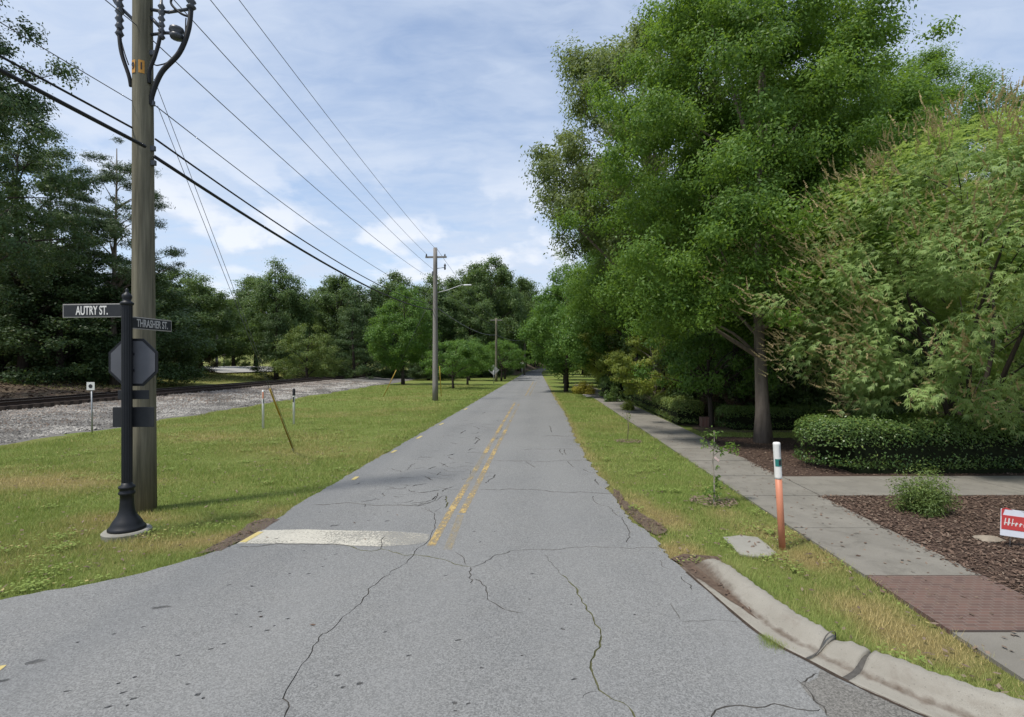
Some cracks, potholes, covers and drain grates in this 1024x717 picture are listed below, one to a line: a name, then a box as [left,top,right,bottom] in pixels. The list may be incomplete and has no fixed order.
crack [241,411,736,717]
crack [711,673,827,717]
